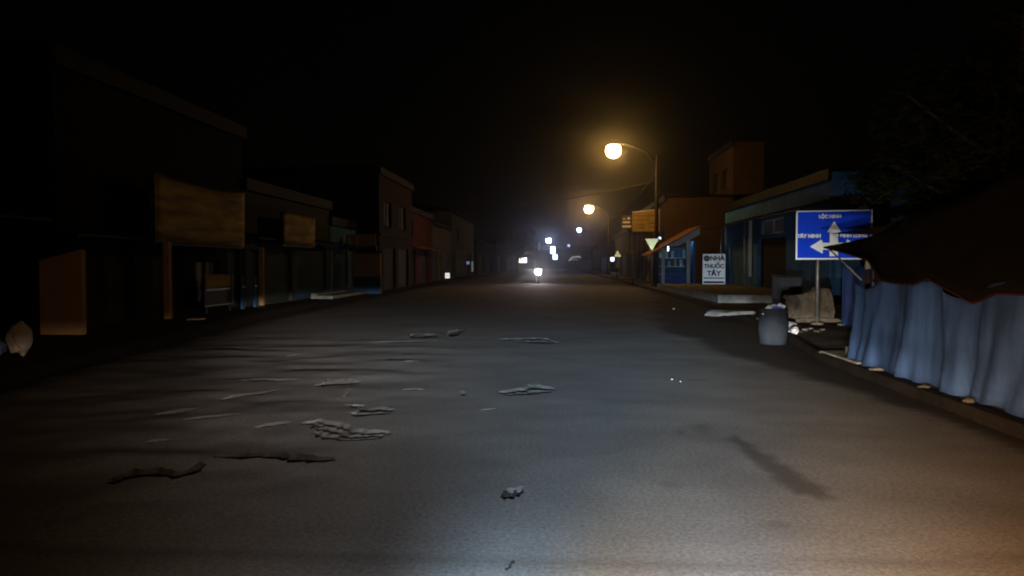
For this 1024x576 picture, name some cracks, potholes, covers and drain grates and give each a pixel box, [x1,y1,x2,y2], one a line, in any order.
pothole [345,404,395,417]
pothole [500,486,525,501]
pothole [313,378,361,387]
pothole [301,419,392,441]
pothole [498,383,555,396]
